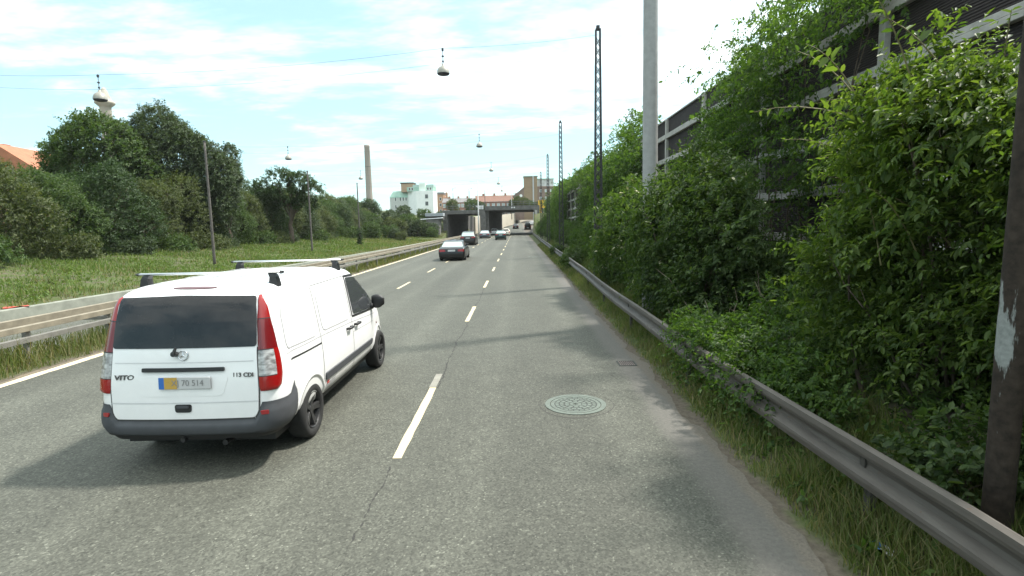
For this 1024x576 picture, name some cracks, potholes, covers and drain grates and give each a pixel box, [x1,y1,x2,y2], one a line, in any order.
manhole cover [539,393,614,418]
crack [332,462,393,576]
